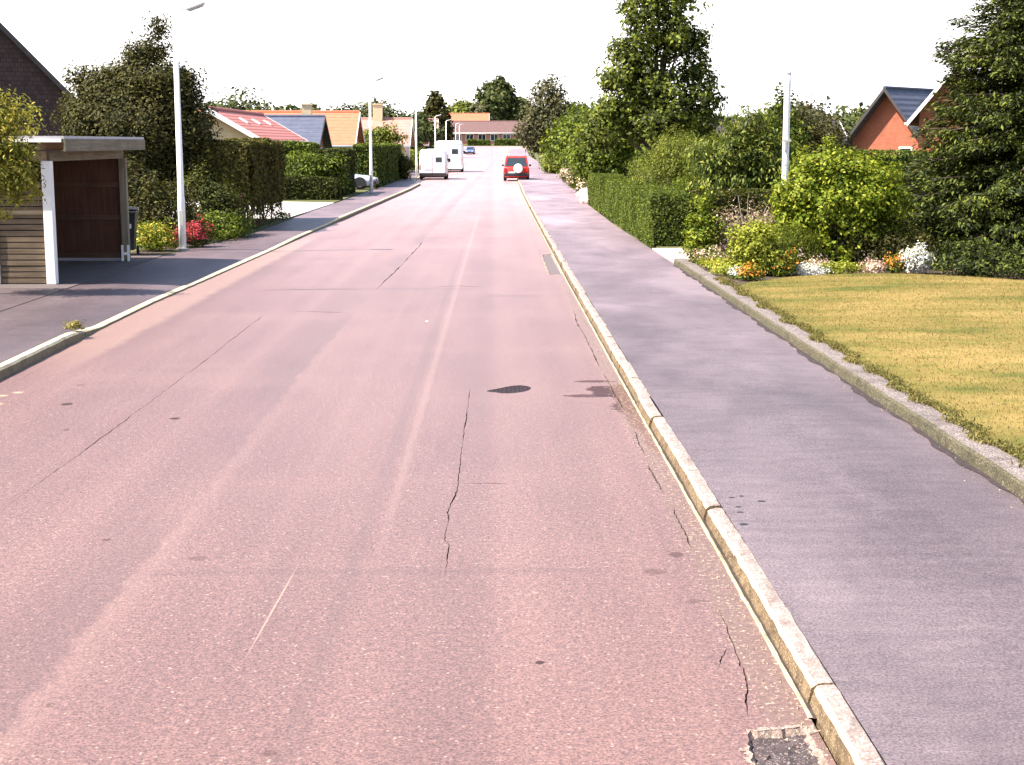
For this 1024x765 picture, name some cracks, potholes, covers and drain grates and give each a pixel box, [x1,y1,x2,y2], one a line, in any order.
crack [5,318,260,508]
crack [719,613,749,714]
crack [634,430,691,547]
crack [444,391,504,575]
